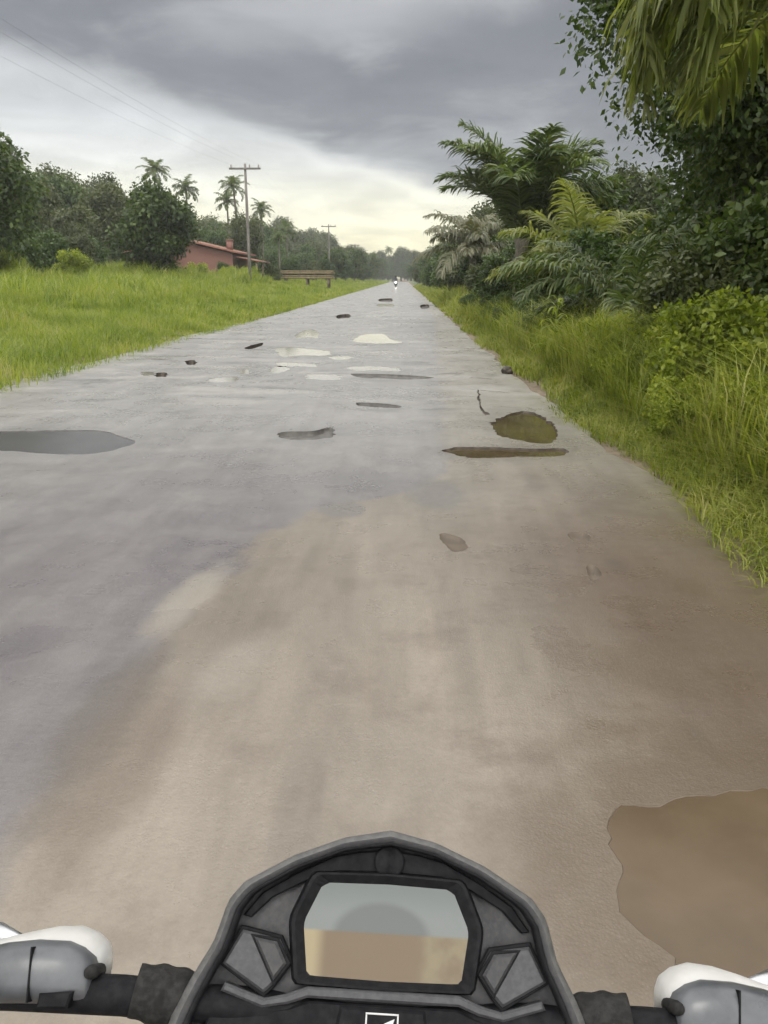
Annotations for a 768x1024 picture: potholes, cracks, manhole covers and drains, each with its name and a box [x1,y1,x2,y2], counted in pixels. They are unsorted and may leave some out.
pothole [277,427,336,440]
pothole [295,329,320,338]
pothole [0,430,135,455]
pothole [442,447,569,458]
pothole [274,347,333,357]
pothole [607,787,768,978]
pothole [489,411,558,444]
pothole [439,533,468,552]
pothole [352,334,402,344]
crack [471,377,507,415]
